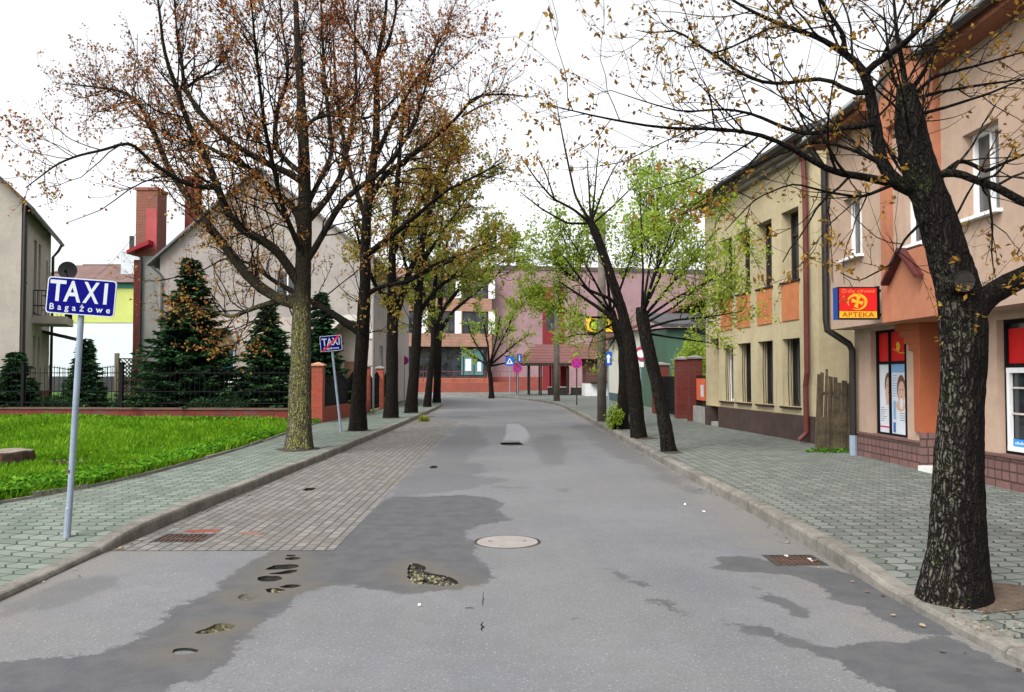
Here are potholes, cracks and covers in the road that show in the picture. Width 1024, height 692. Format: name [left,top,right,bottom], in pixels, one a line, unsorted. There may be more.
pothole [407,563,458,586]
drain grate [150,534,216,551]
pothole [238,593,259,601]
manhole cover [474,535,541,549]
drain grate [762,555,829,566]
pothole [195,623,235,634]
